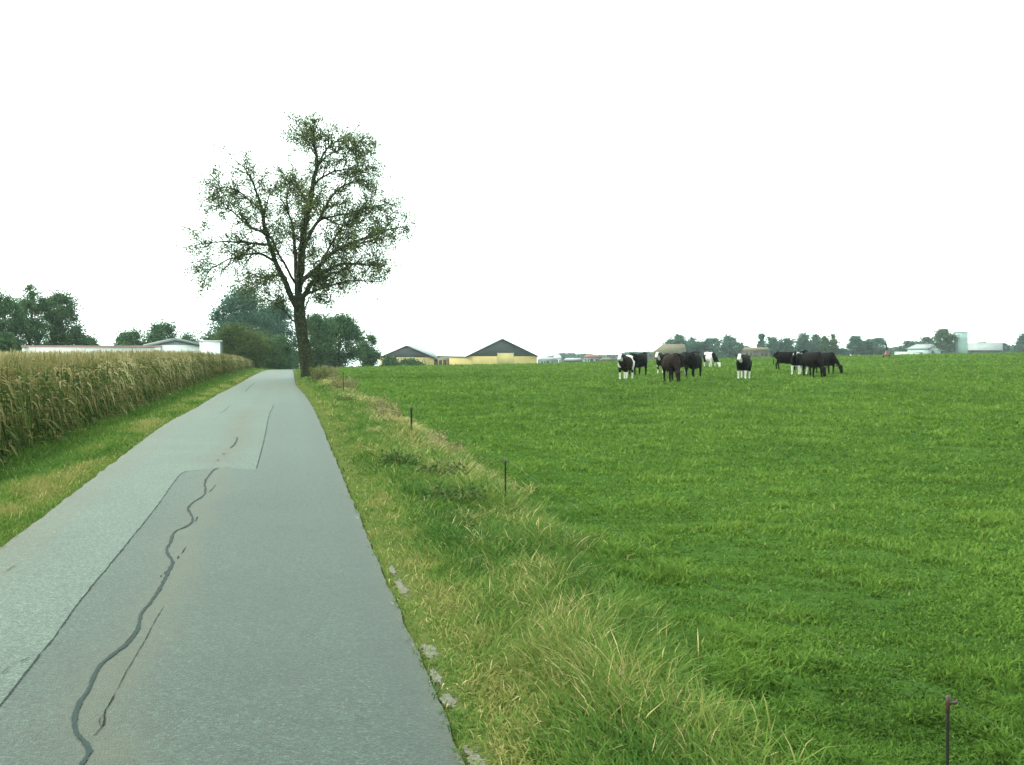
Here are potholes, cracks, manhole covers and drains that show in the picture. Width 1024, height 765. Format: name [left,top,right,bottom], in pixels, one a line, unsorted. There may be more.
crack [92,606,164,737]
